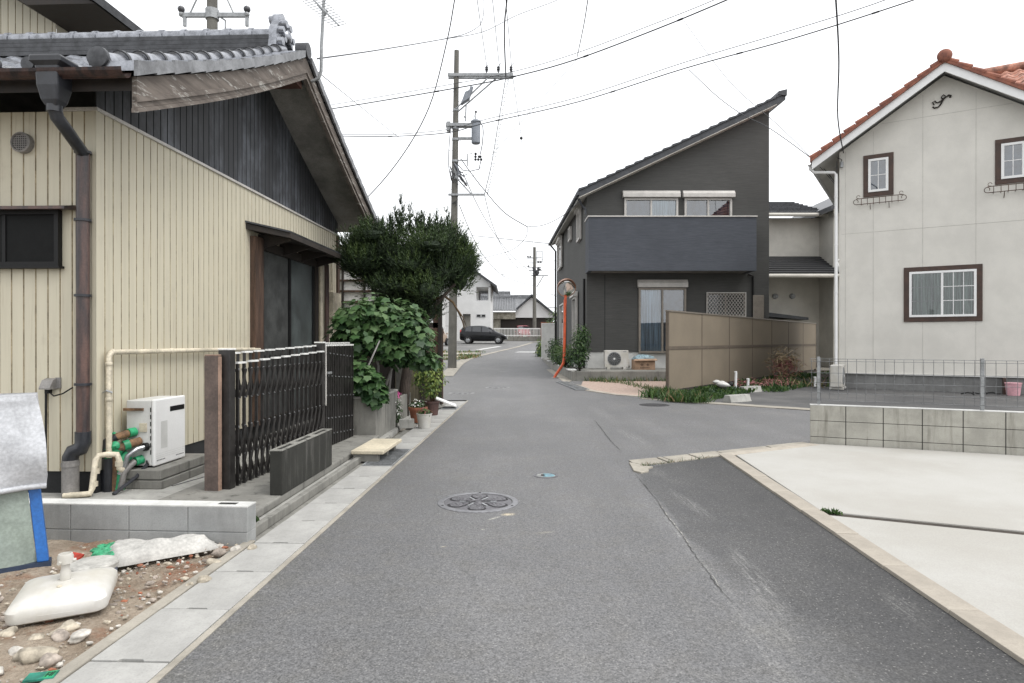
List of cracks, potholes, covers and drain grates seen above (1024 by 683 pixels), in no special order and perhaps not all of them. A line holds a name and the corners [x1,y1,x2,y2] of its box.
manhole cover [437,492,519,513]
drain grate [361,449,411,466]
